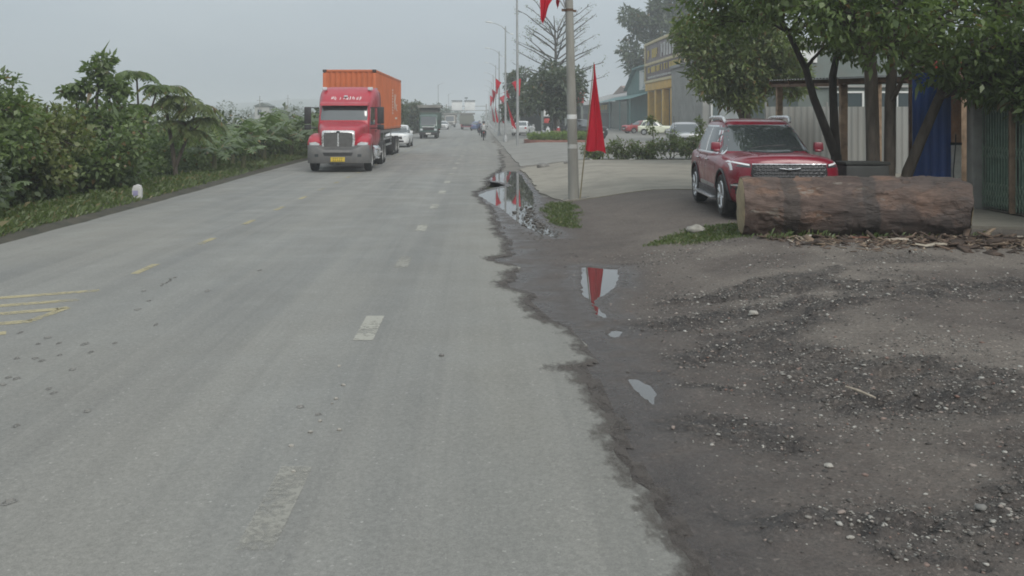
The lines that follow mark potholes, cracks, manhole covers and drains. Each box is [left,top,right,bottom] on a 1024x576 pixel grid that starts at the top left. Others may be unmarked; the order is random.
pothole [477,171,563,238]
pothole [616,374,669,411]
pothole [573,265,627,320]
